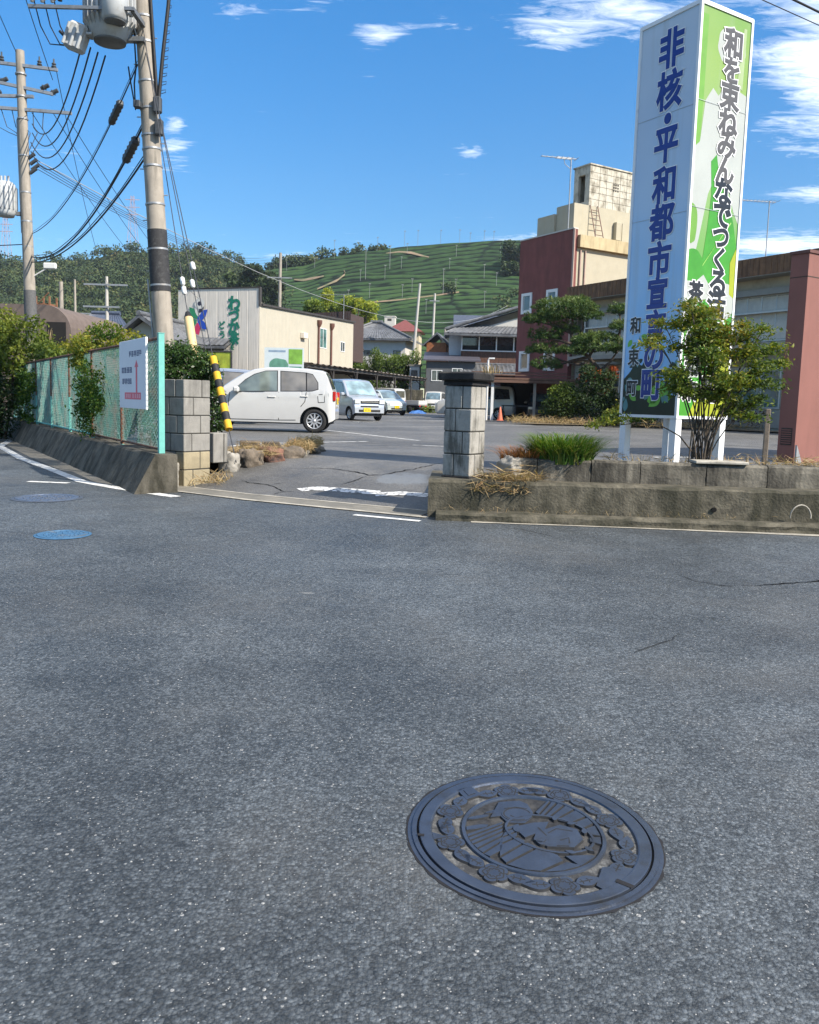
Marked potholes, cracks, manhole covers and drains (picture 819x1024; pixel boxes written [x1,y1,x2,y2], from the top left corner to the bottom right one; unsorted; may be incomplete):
manhole cover [405,773,666,919]
manhole cover [10,494,83,502]
crack [682,575,819,586]
manhole cover [33,530,92,539]
